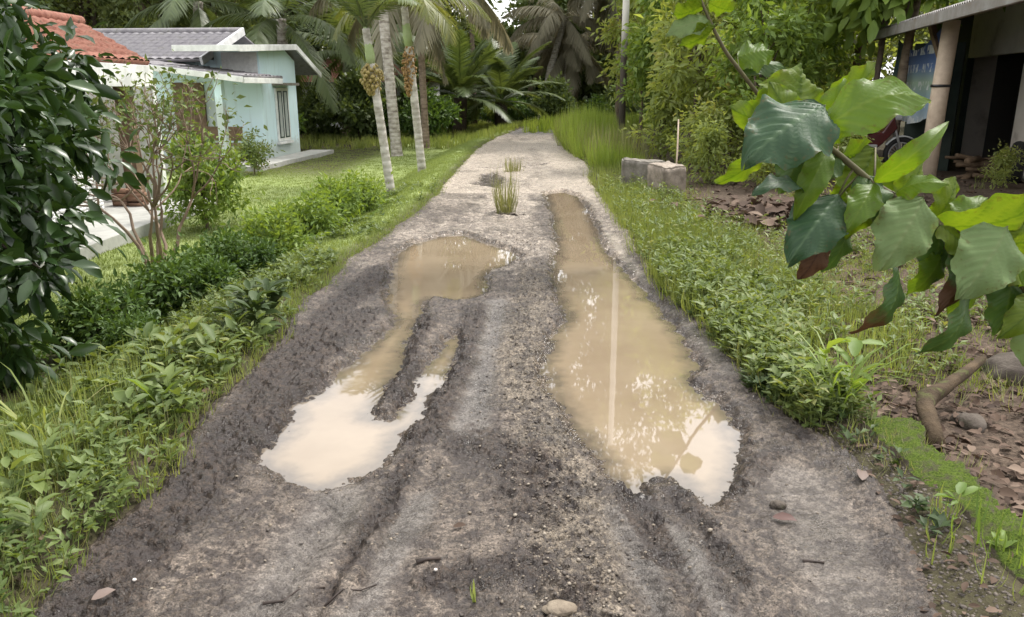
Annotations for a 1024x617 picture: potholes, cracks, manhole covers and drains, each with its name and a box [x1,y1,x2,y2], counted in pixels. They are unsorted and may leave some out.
pothole [230,229,531,493]
pothole [526,188,763,516]
pothole [469,171,507,189]
